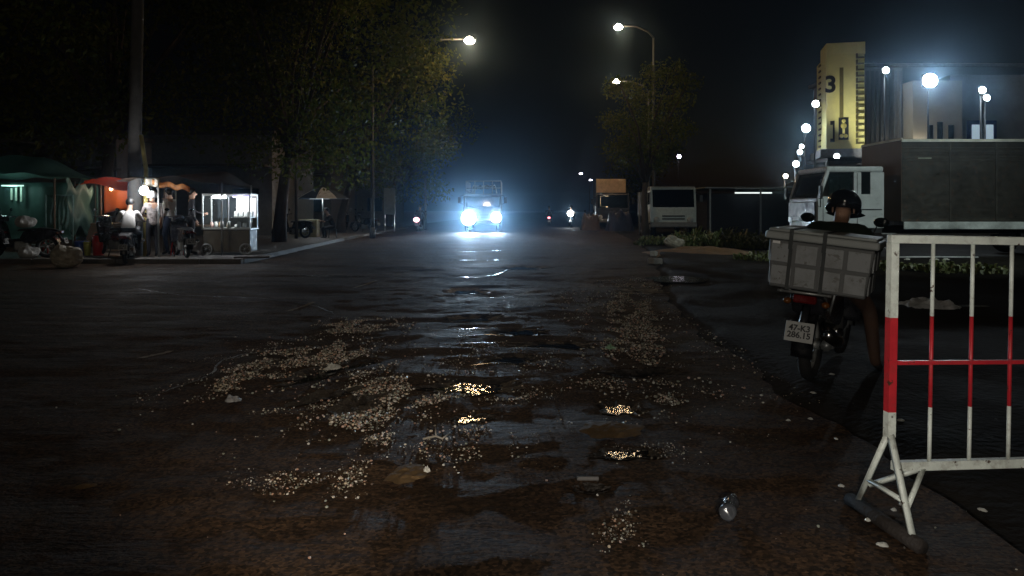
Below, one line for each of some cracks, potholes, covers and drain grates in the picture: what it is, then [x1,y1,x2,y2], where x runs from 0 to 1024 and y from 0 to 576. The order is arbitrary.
pothole [595,399,649,416]
pothole [507,341,600,350]
pothole [450,410,496,424]
pothole [586,447,670,461]
pothole [484,328,547,336]
